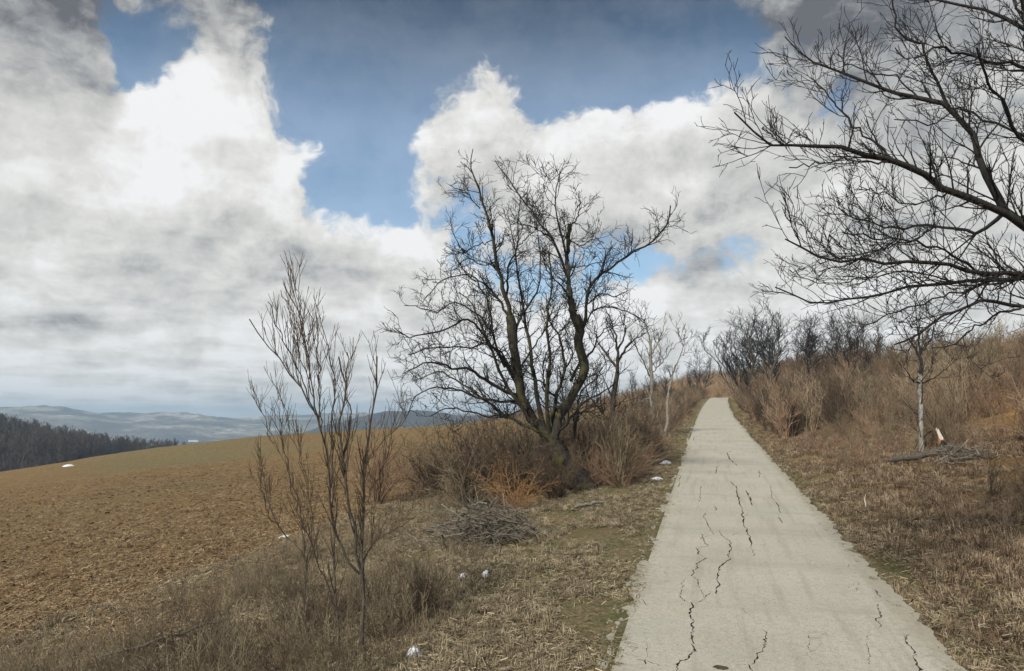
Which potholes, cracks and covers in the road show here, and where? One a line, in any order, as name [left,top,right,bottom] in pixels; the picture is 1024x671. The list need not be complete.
crack [905,638,923,671]
crack [744,631,767,671]
